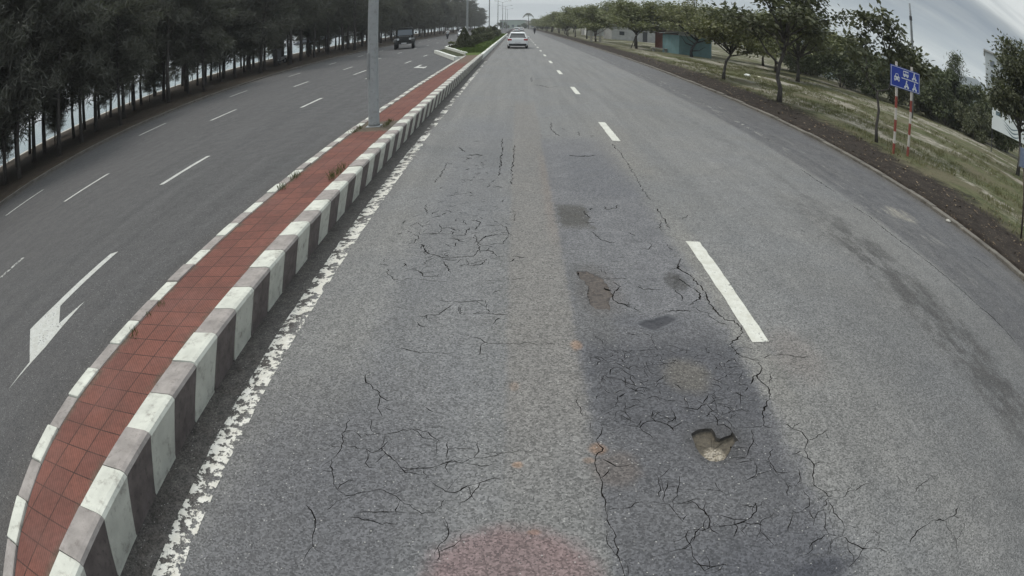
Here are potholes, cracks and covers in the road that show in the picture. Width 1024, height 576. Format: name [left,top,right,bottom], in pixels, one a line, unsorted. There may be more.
crack [577,205,885,573]
crack [417,300,552,355]
crack [370,139,525,293]
crack [304,420,528,559]
pothole [691,428,738,462]
